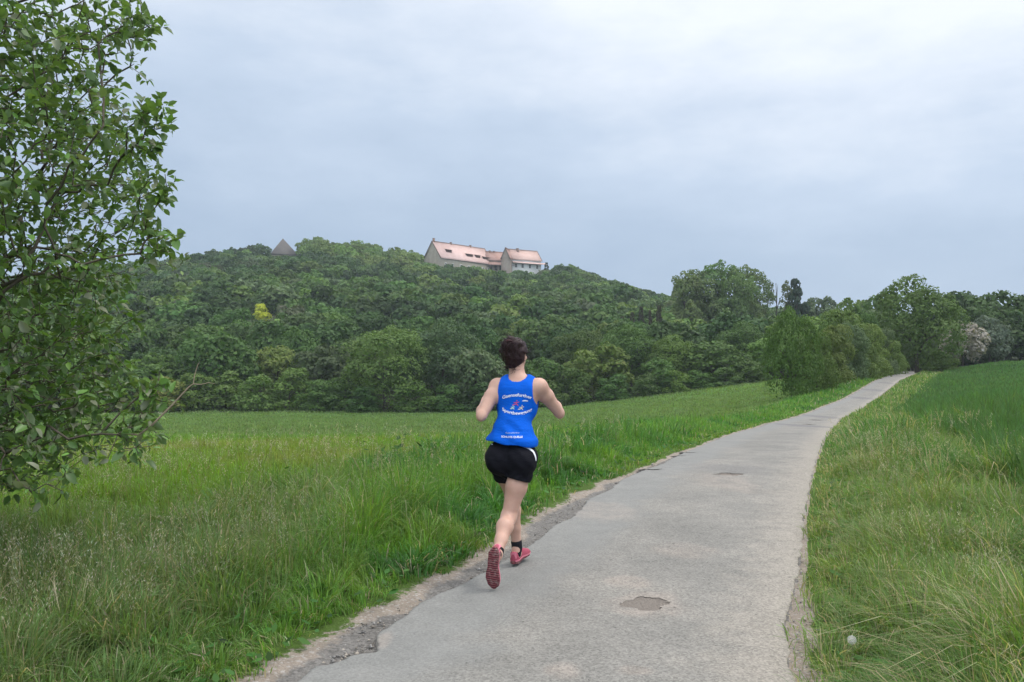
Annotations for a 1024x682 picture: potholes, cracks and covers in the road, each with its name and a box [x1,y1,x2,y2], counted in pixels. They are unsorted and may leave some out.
pothole [620,596,670,611]
